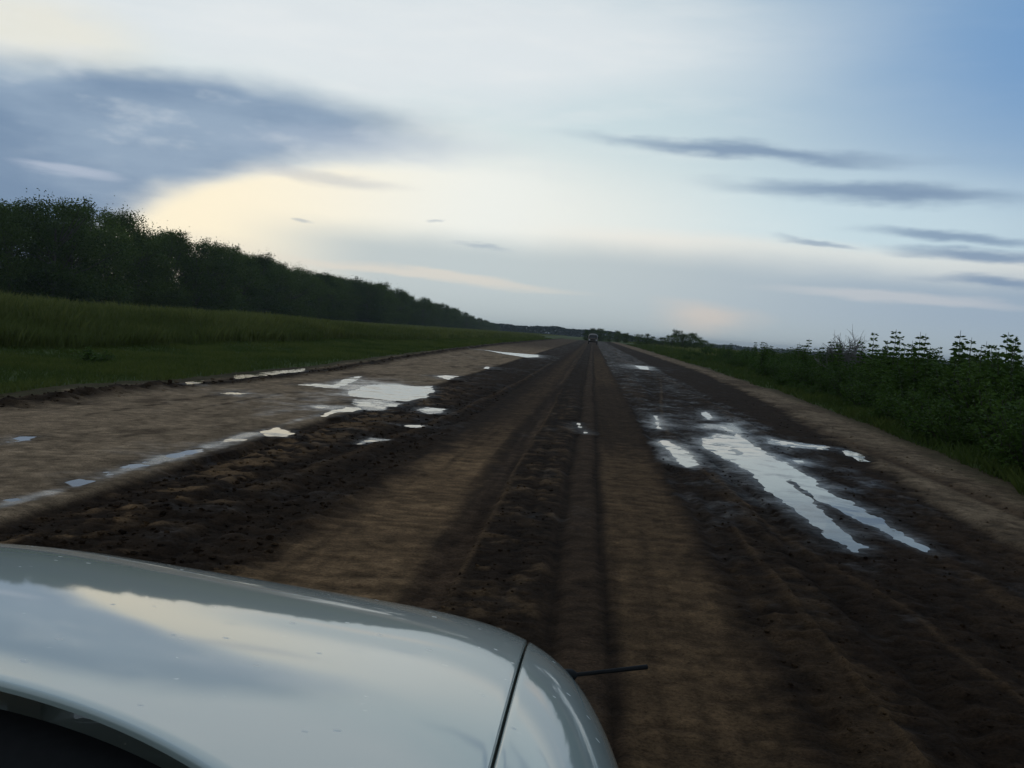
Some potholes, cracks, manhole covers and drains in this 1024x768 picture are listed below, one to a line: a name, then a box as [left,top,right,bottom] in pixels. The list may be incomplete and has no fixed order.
pothole [651,439,705,468]
pothole [341,383,440,411]
pothole [288,375,367,389]
pothole [695,410,719,420]
pothole [834,447,874,462]
pothole [315,405,365,417]
